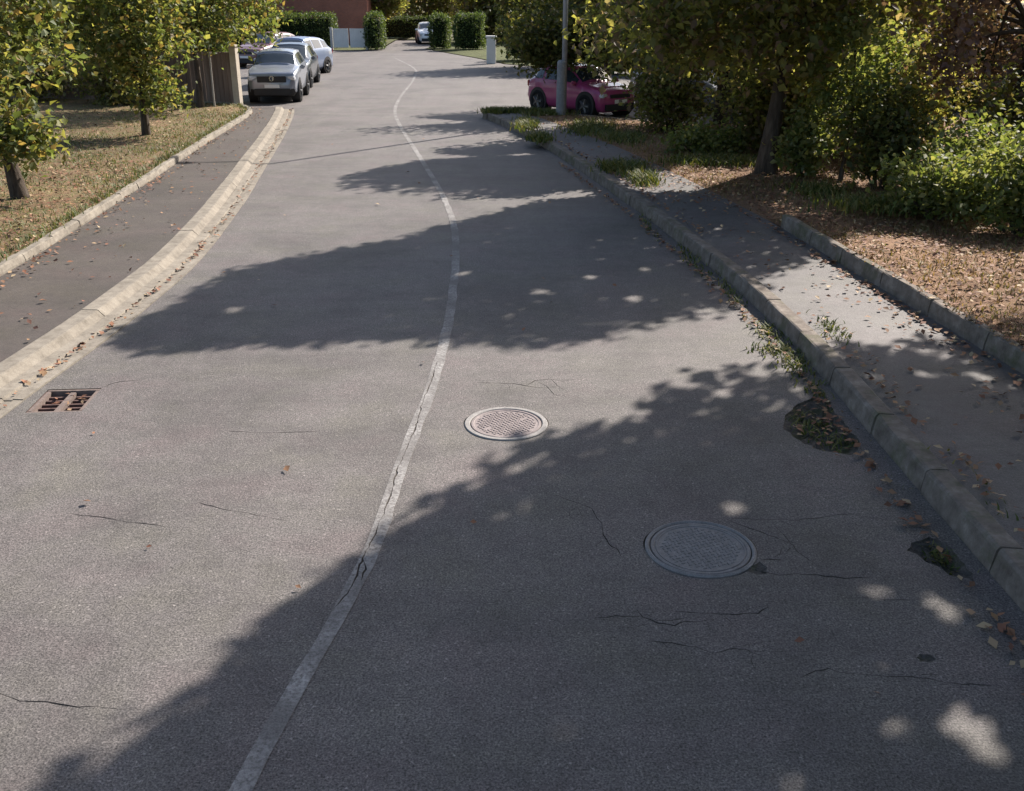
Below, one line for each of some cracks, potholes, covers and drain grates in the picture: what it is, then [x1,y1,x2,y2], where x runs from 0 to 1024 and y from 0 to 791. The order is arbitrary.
crack [0,693,129,709]
drain grate [25,389,100,413]
pothole [907,537,974,581]
manhole cover [464,407,548,441]
manhole cover [645,520,757,578]
crack [805,668,993,700]
crack [593,605,778,666]
crack [66,512,165,527]
crack [564,498,621,556]
pothole [784,398,860,455]
crack [727,513,886,579]
